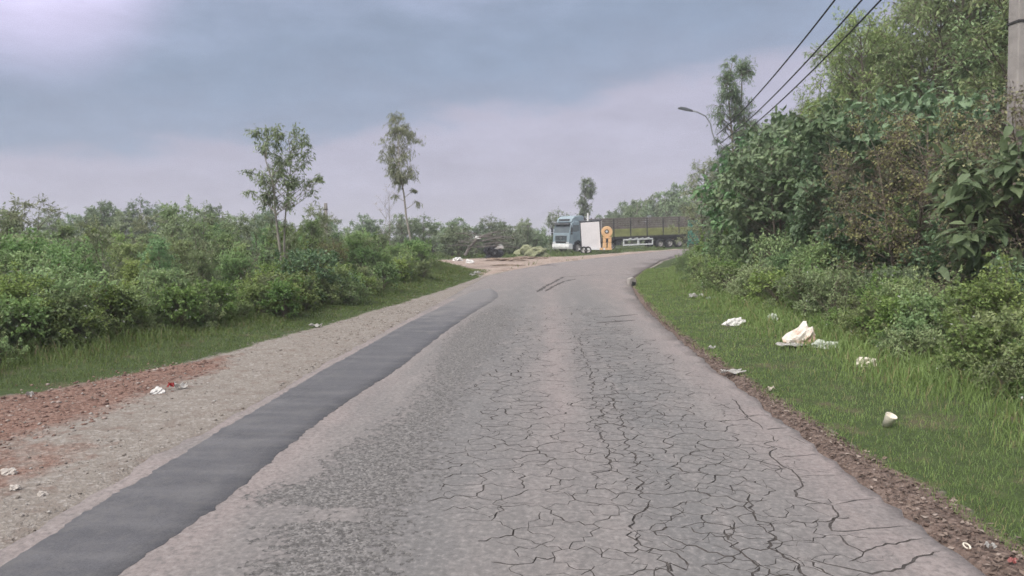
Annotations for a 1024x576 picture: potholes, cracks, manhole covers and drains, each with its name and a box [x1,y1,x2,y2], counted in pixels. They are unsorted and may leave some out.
crack [537,275,589,292]
crack [421,306,940,576]
